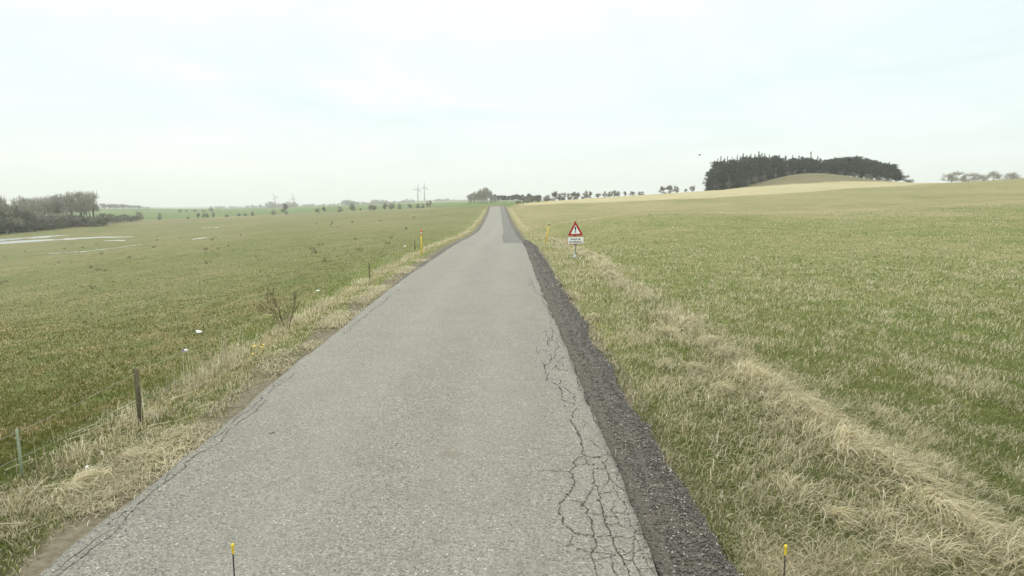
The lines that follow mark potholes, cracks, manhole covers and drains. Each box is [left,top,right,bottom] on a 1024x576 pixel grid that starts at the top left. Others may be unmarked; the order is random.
crack [543,373,668,576]
